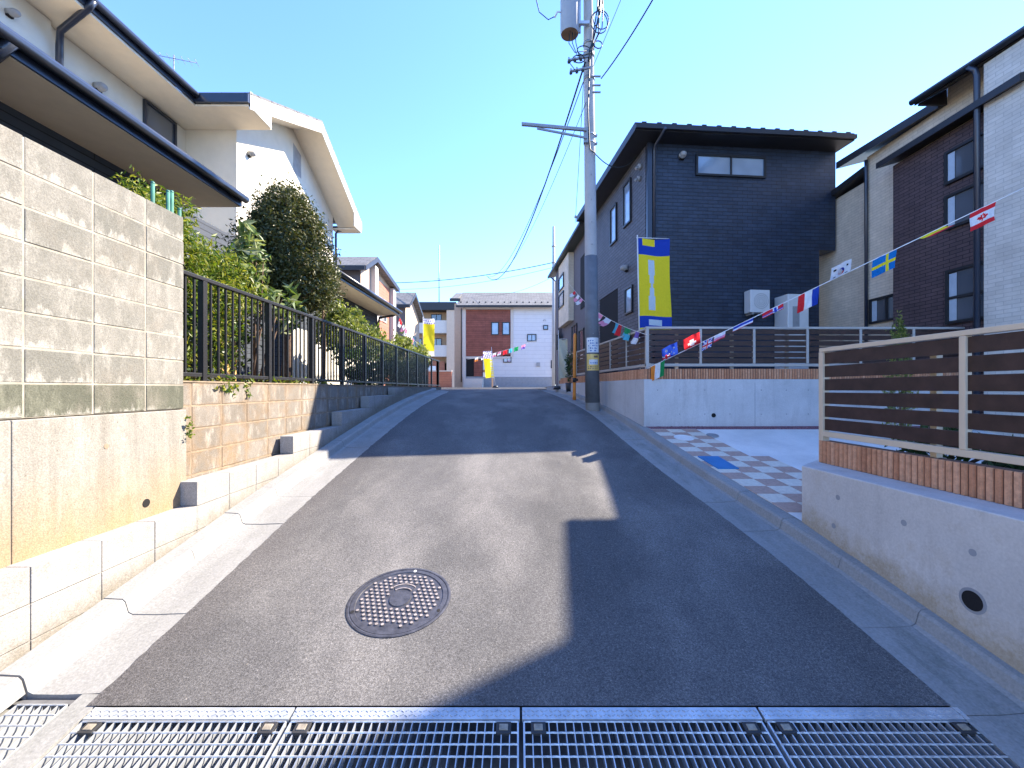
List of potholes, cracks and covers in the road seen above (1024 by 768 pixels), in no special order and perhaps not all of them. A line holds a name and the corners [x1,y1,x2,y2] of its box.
manhole cover [346,568,451,638]
drain grate [33,707,295,768]
drain grate [758,707,1021,768]
drain grate [0,704,68,766]
drain grate [522,707,790,768]
drain grate [265,707,520,768]
